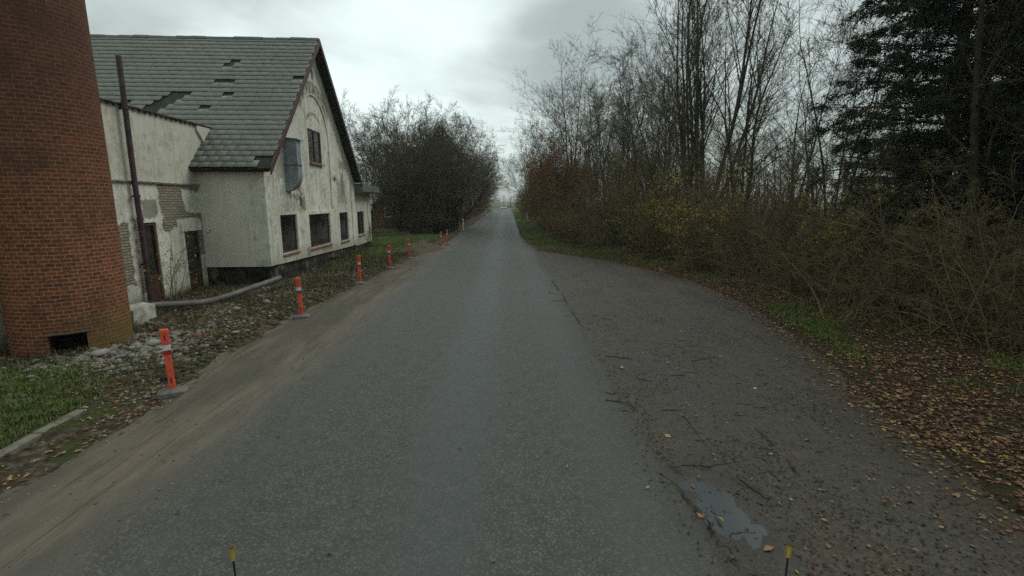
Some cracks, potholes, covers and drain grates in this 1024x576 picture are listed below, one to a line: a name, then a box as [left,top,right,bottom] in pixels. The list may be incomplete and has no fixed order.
crack [658,474,723,547]
